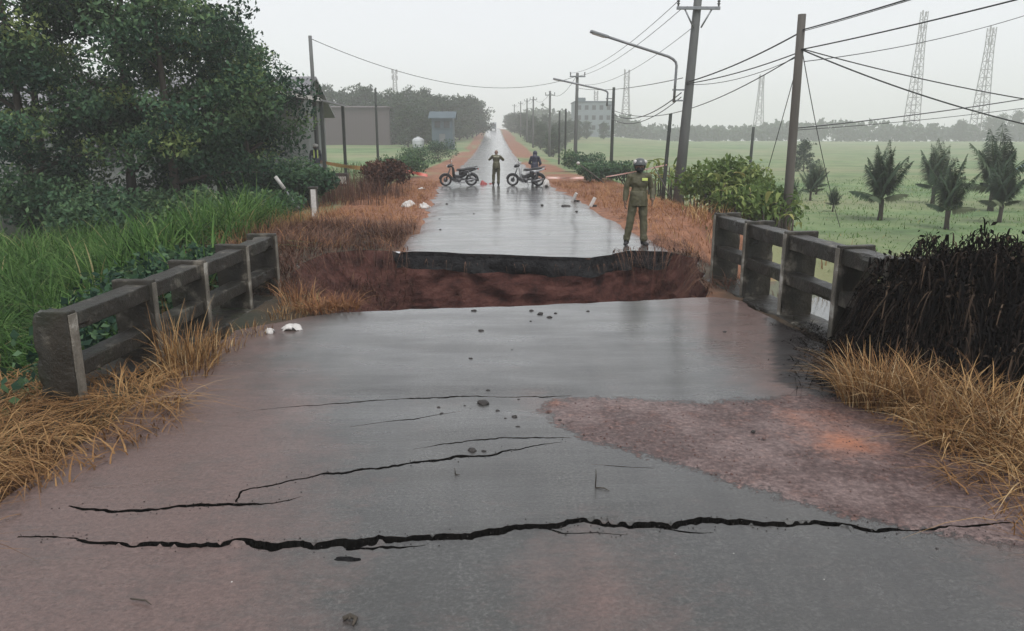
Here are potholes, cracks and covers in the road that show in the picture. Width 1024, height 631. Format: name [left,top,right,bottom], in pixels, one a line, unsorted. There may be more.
crack [264,395,573,427]
crack [17,437,993,560]
